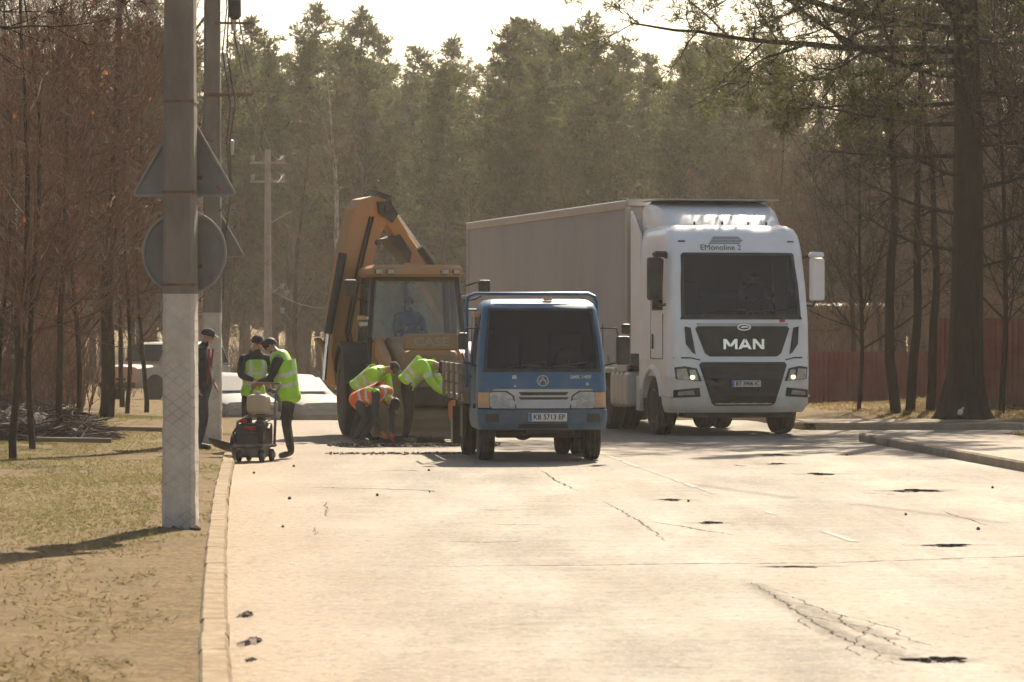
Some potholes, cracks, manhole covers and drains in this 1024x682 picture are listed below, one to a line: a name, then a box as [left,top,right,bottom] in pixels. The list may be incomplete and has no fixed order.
crack [302,487,434,535]
crack [605,502,731,540]
crack [751,583,932,664]
pothole [236,637,263,647]
